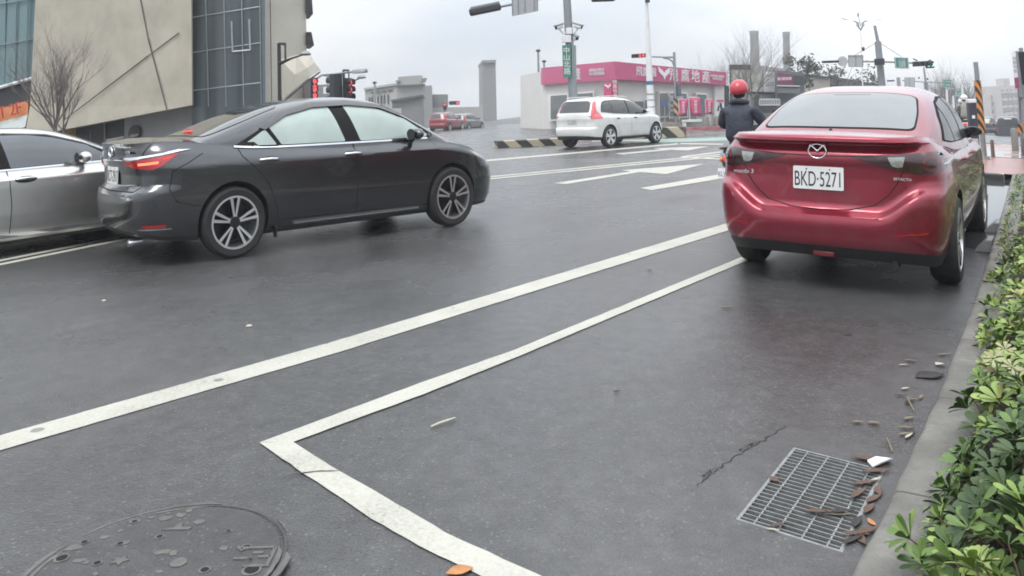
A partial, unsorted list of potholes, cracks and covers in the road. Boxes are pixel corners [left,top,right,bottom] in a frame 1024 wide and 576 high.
drain grate [736,447,884,552]
manhole cover [22,502,291,576]
